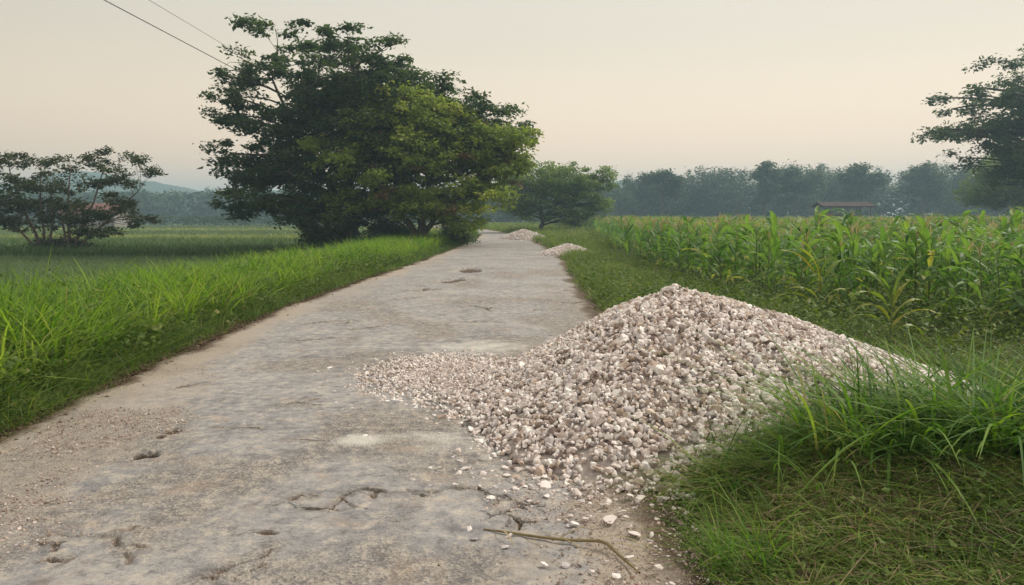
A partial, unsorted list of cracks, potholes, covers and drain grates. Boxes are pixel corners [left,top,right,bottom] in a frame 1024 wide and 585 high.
crack [270,486,545,531]
pothole [124,448,165,464]
pothole [156,426,188,438]
pothole [454,266,486,275]
